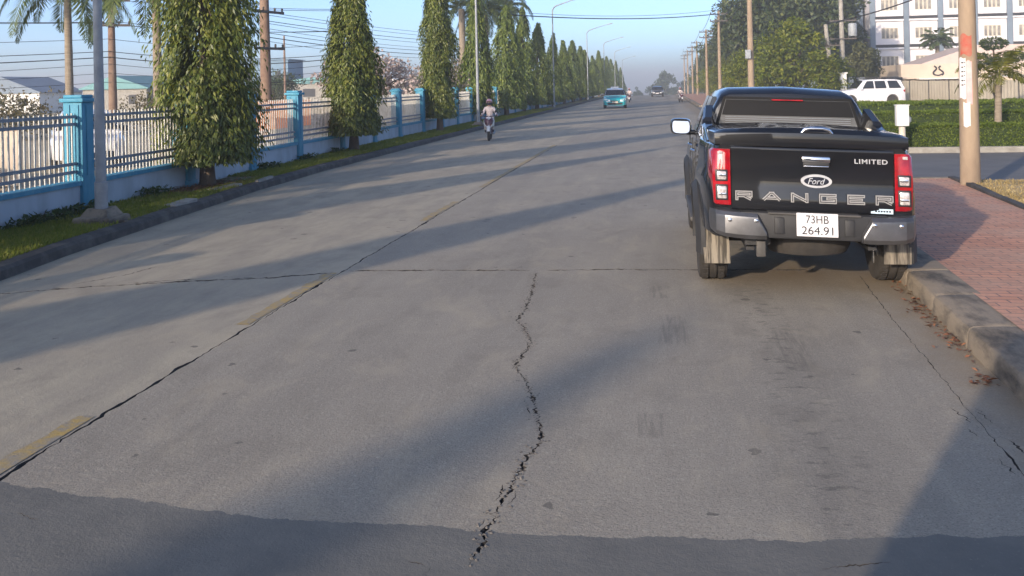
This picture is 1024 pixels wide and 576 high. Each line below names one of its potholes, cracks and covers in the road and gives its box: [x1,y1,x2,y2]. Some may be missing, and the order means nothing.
crack [455,274,550,567]
